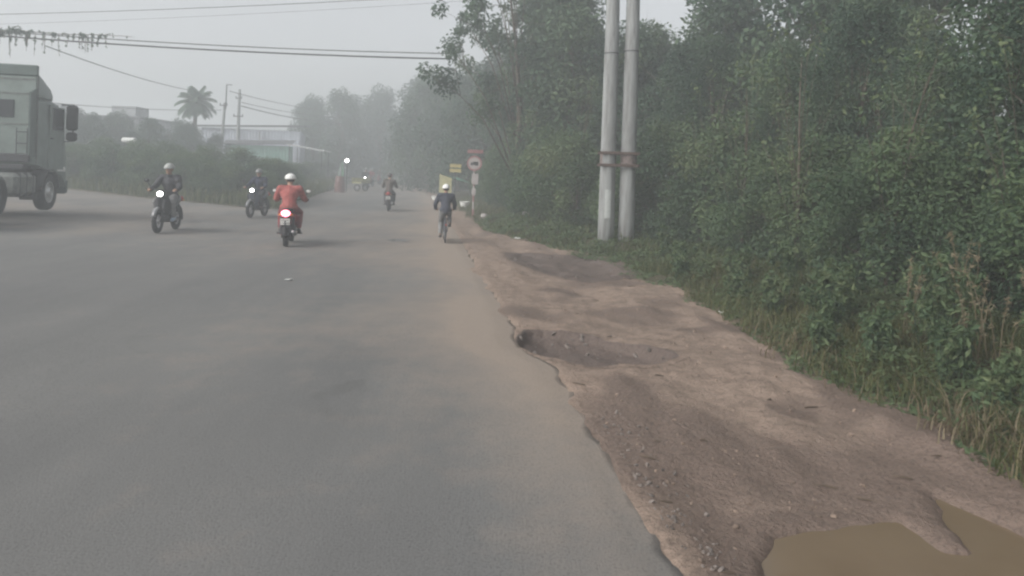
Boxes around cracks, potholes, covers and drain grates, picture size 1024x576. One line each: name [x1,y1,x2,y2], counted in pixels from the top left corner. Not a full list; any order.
pothole [717,475,1024,576]
pothole [513,328,689,369]
pothole [505,252,637,283]
